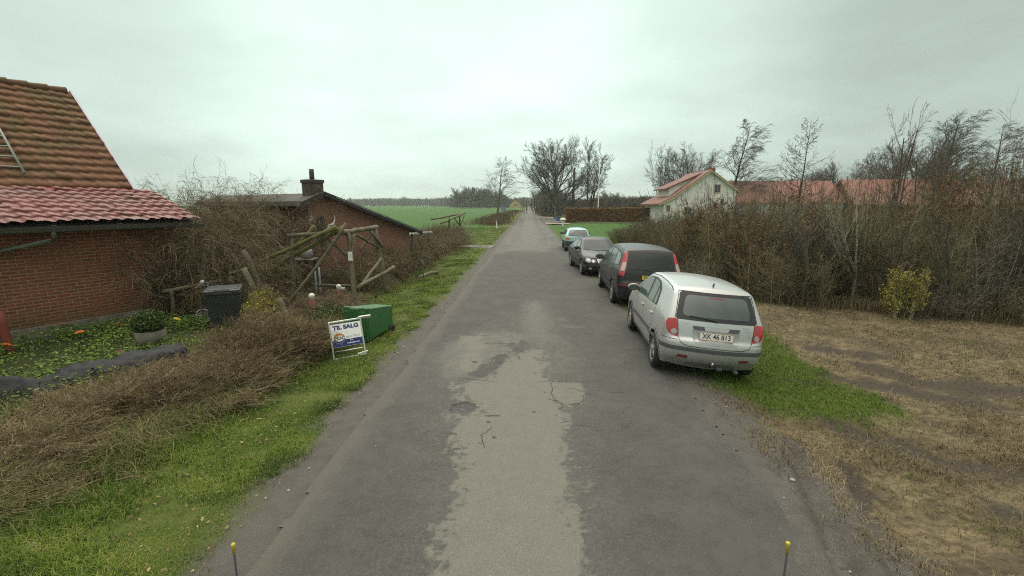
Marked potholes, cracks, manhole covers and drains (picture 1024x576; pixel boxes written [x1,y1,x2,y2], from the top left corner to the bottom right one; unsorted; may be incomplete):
pothole [446,401,480,414]
crack [550,381,595,428]
